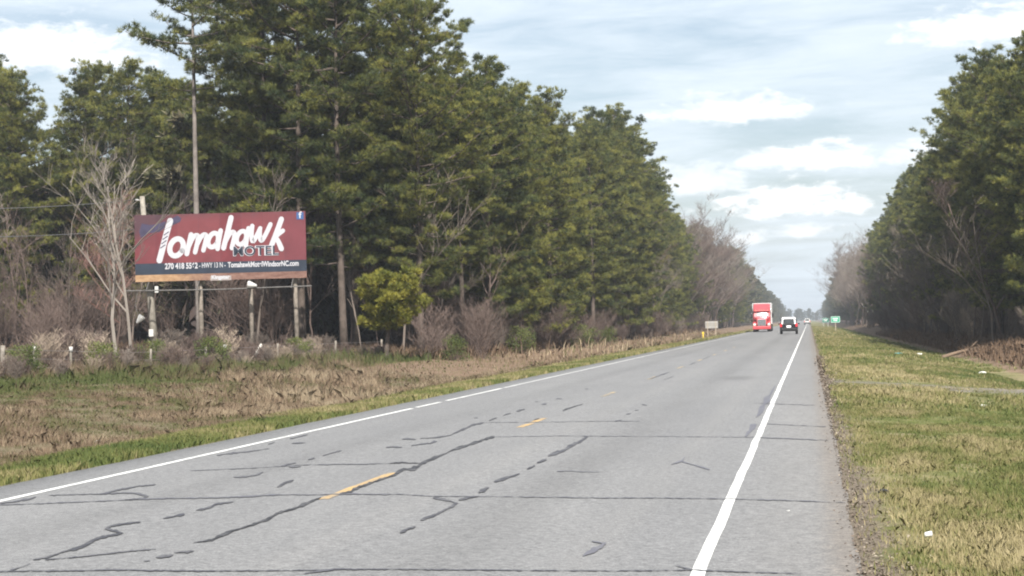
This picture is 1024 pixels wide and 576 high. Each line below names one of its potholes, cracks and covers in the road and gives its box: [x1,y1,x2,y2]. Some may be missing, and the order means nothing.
crack [0,450,828,505]
crack [420,409,826,440]
